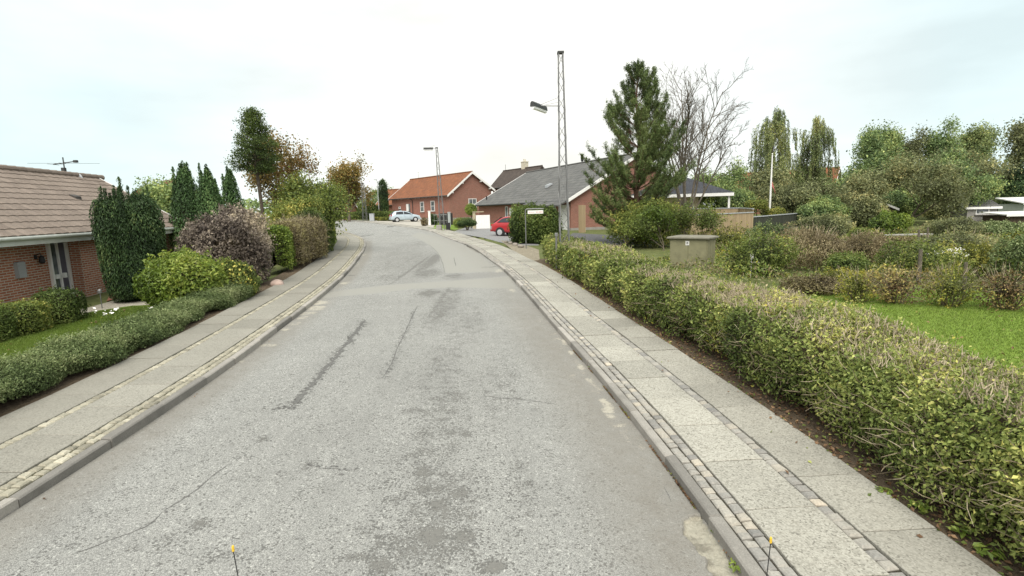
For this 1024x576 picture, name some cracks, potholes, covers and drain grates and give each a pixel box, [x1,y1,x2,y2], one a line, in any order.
crack [306,461,359,475]
crack [76,467,224,553]
